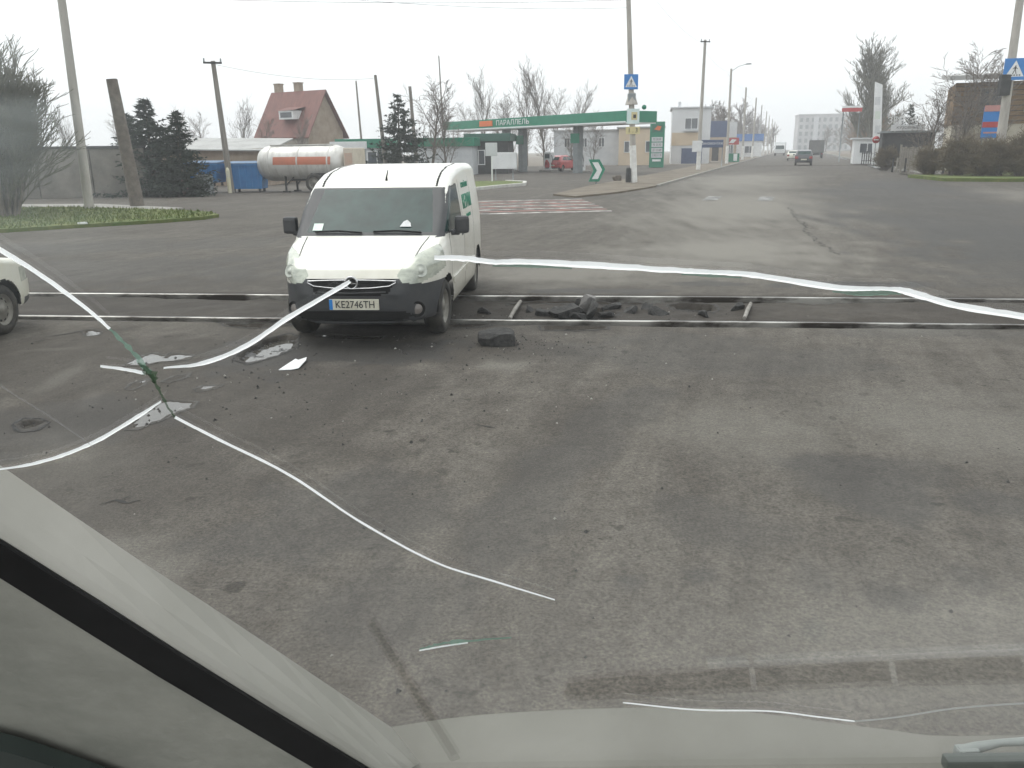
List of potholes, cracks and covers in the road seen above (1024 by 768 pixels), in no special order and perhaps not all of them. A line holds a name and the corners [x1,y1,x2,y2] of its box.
crack [788,207,839,254]
pothole [121,352,195,366]
pothole [231,333,301,365]
pothole [11,417,51,432]
pothole [123,399,201,430]
pothole [665,302,720,313]
